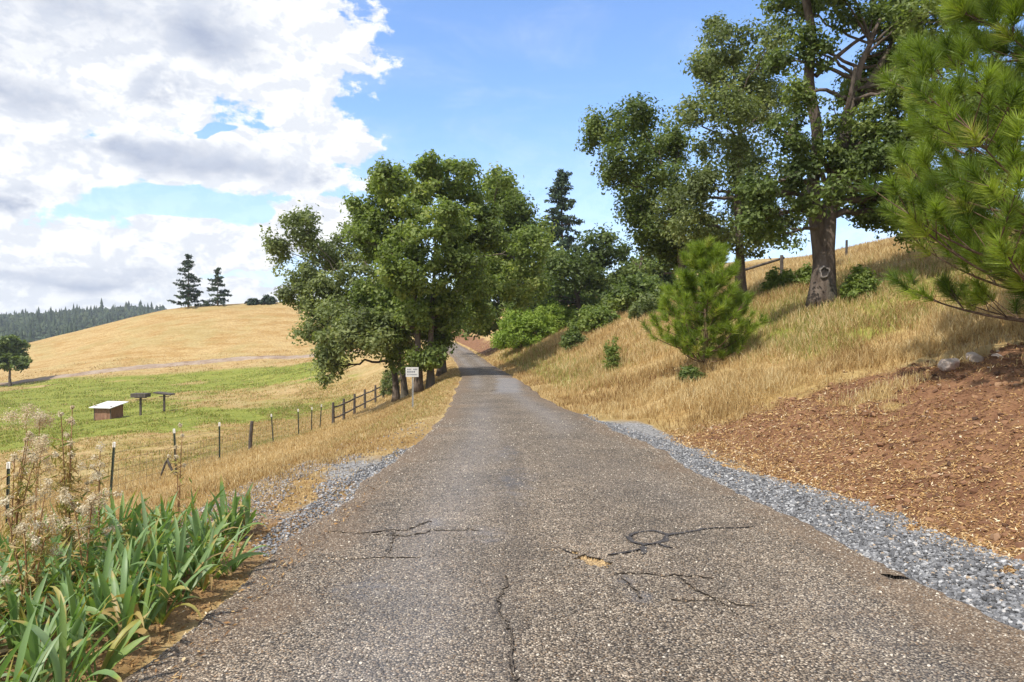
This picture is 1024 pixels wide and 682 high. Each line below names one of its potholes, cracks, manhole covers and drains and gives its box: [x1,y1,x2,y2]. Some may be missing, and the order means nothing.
crack [328,520,478,559]
crack [608,526,755,555]
pothole [571,551,613,569]
crack [614,572,750,615]
crack [496,575,519,682]
